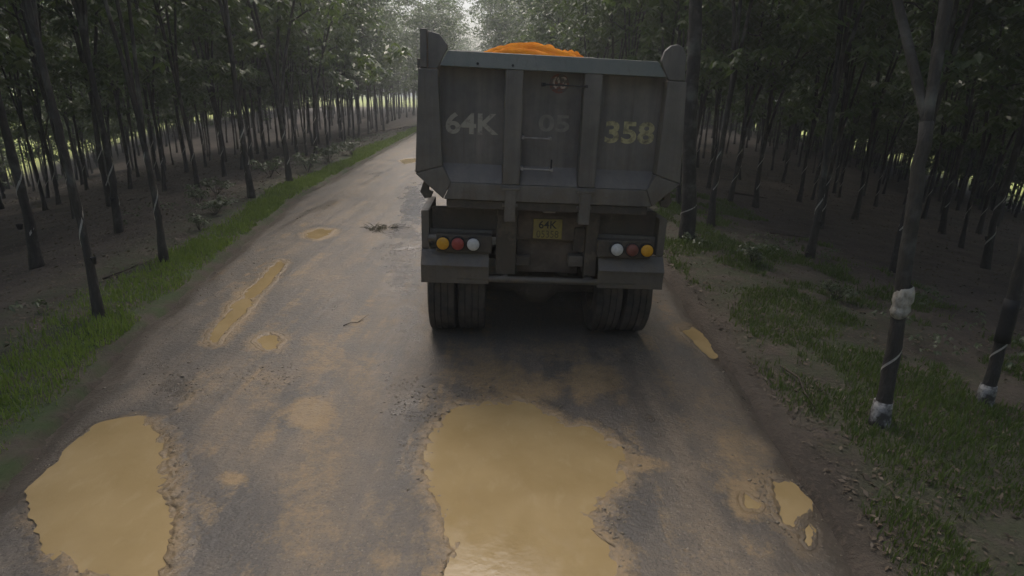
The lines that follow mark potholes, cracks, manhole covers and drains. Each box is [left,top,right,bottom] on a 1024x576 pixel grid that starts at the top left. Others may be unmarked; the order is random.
pothole [202,259,290,347]
pothole [14,413,200,576]
pothole [765,474,816,532]
pothole [738,490,766,513]
pothole [250,331,287,352]
pothole [304,228,337,240]
pothole [799,520,818,551]
pothole [404,393,645,576]
pothole [675,325,720,361]
